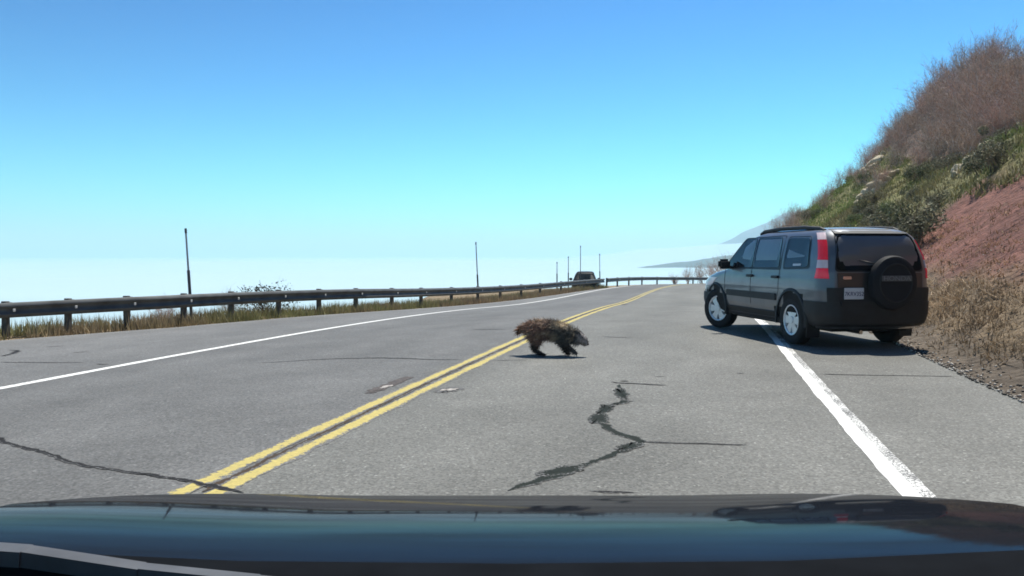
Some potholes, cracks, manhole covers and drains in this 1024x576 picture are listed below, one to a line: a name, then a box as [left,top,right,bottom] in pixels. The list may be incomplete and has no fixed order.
crack [0,437,242,492]
crack [1,346,86,363]
